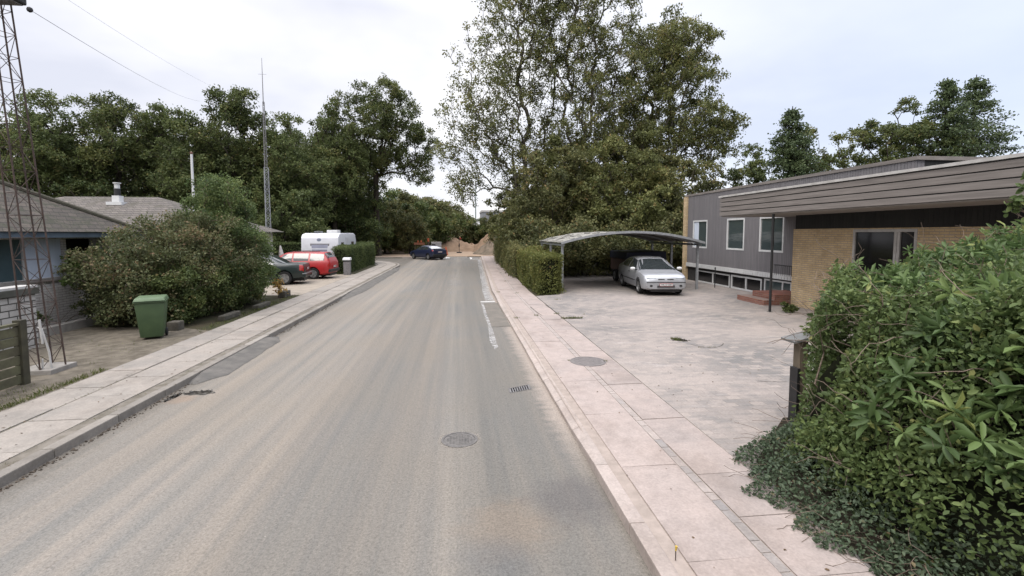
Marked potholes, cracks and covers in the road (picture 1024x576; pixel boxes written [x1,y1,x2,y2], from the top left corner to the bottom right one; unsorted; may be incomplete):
manhole cover [570,357,606,367]
drain grate [508,384,532,393]
manhole cover [441,432,478,448]
